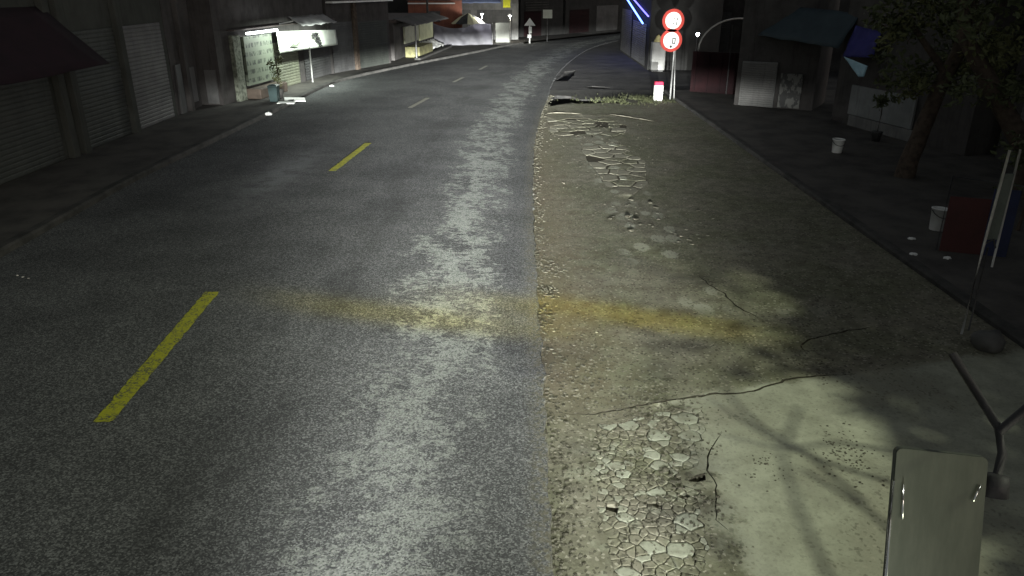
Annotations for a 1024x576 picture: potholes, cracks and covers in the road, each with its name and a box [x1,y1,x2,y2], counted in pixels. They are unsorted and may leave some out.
pothole [555,70,576,81]
crack [567,374,851,576]
crack [546,112,657,195]
crack [698,275,758,318]
pothole [547,96,631,106]
crack [800,326,875,353]
